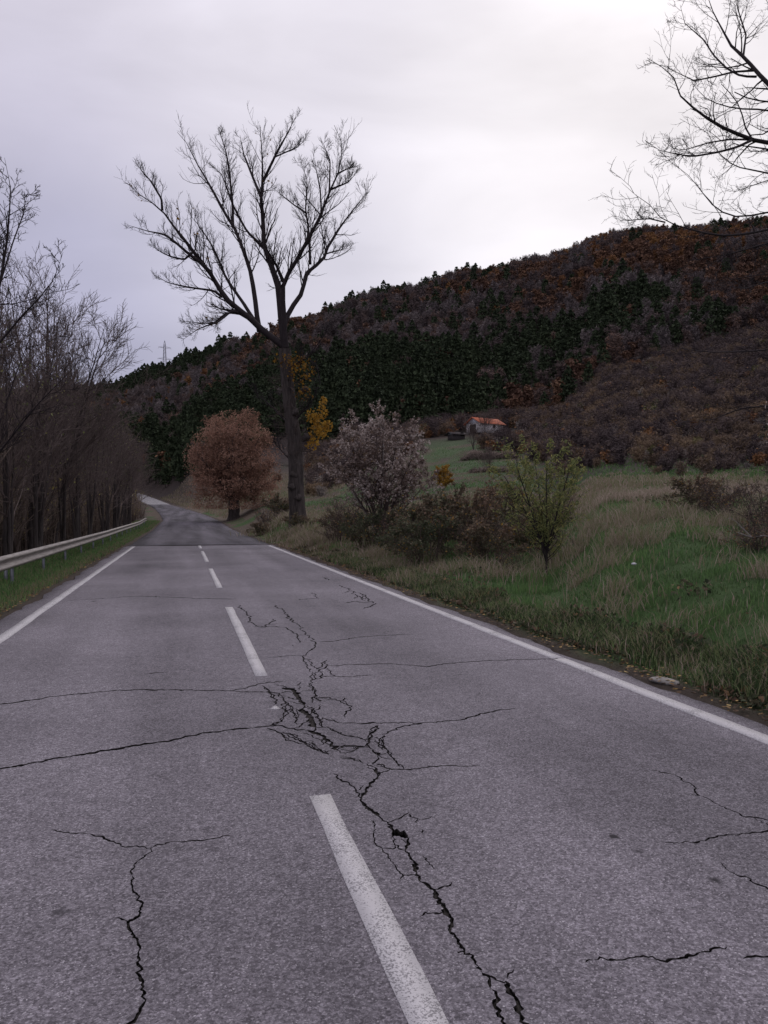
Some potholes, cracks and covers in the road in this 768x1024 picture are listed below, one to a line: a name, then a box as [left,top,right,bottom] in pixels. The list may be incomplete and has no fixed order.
crack [722,864,768,889]
crack [655,770,768,843]
crack [586,947,768,963]
crack [0,577,558,1024]
